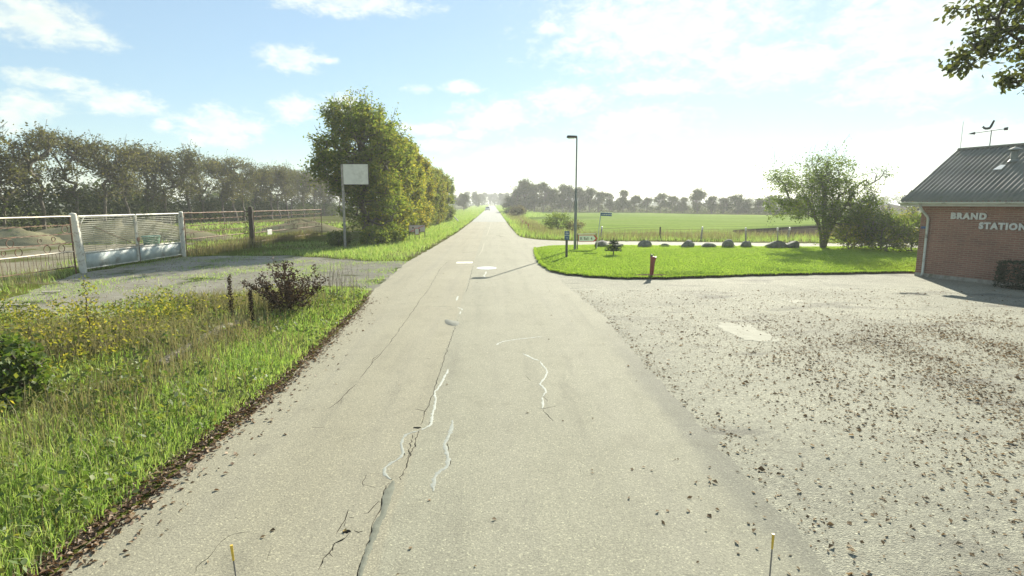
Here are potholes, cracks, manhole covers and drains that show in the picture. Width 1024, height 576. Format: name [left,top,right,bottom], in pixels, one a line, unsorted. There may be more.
crack [318,511,362,570]
crack [326,252,465,410]
